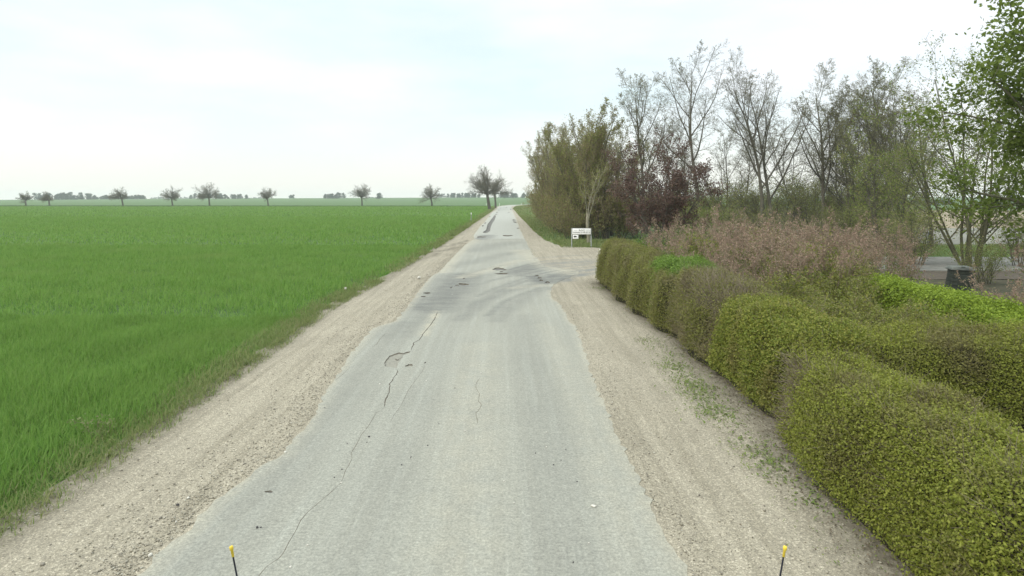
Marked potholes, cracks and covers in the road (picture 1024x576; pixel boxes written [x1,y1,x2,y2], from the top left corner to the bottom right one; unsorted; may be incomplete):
crack [259,314,437,576]
